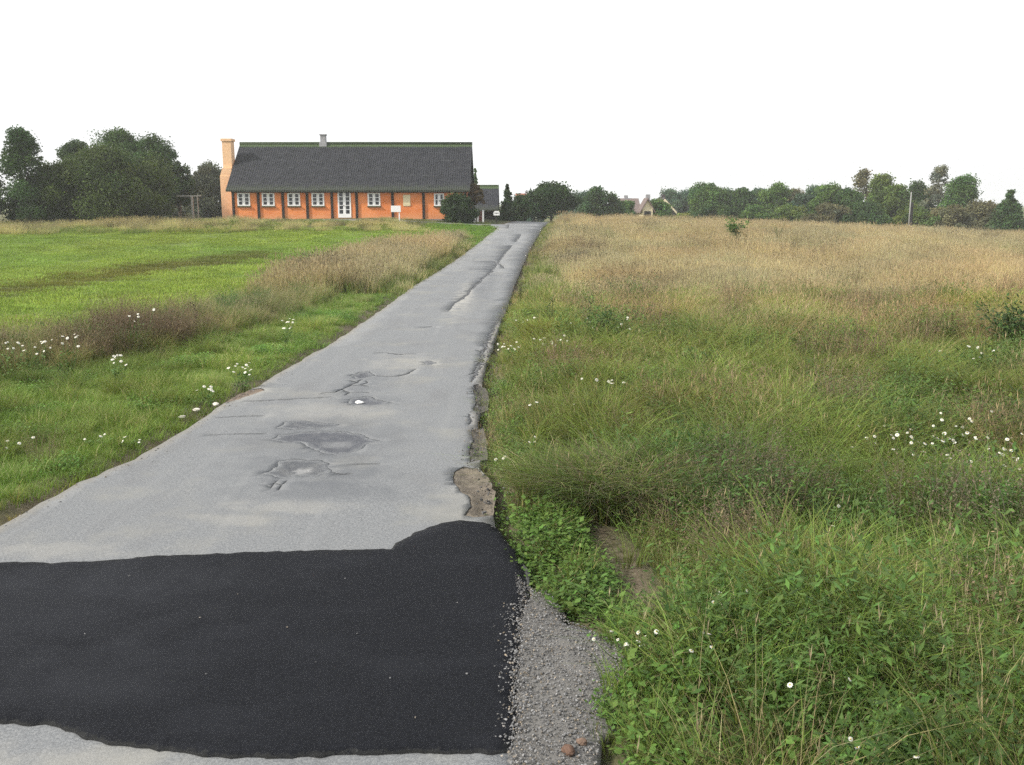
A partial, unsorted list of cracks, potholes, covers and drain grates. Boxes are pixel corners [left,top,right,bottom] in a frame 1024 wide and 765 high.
pothole [348,396,391,405]
pothole [453,467,496,517]
crack [450,234,521,381]
